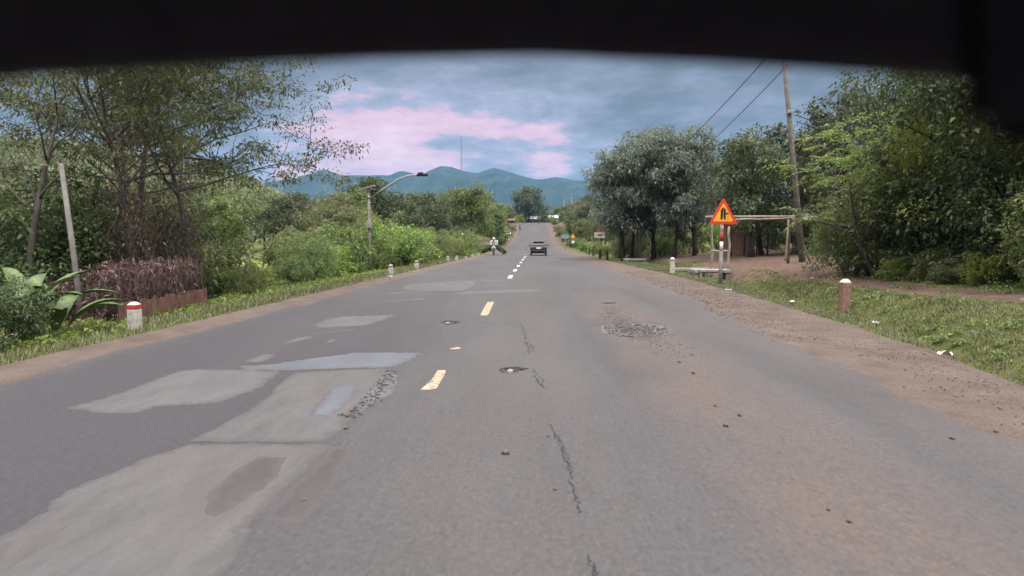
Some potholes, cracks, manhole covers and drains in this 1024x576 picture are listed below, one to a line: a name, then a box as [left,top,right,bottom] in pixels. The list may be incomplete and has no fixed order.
crack [474,322,545,389]
crack [587,554,600,576]
pothole [596,322,675,338]
crack [549,424,582,514]
